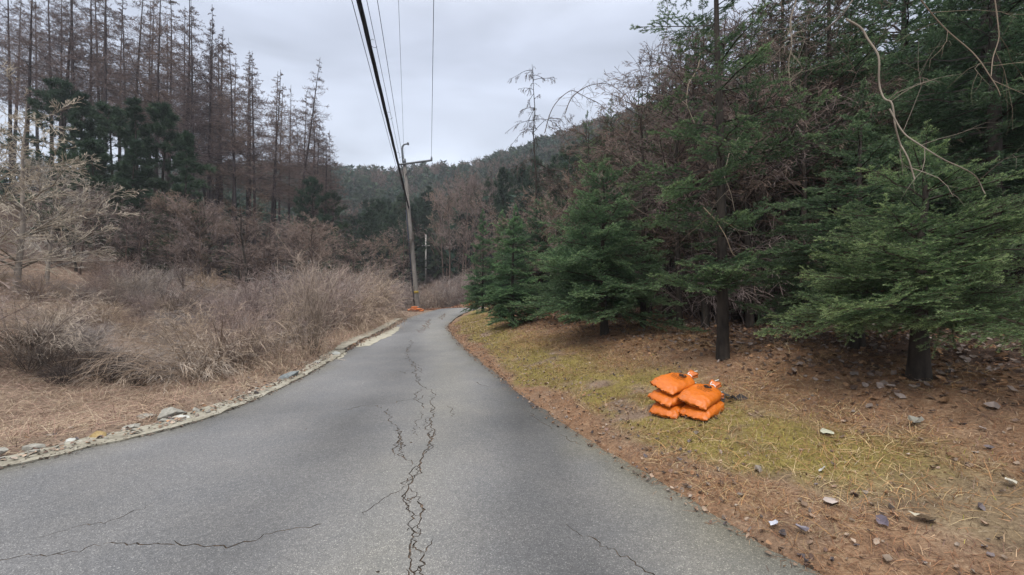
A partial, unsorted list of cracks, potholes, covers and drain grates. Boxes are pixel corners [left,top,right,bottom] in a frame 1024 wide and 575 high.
crack [0,523,322,561]
crack [362,313,454,575]
crack [565,523,655,575]
